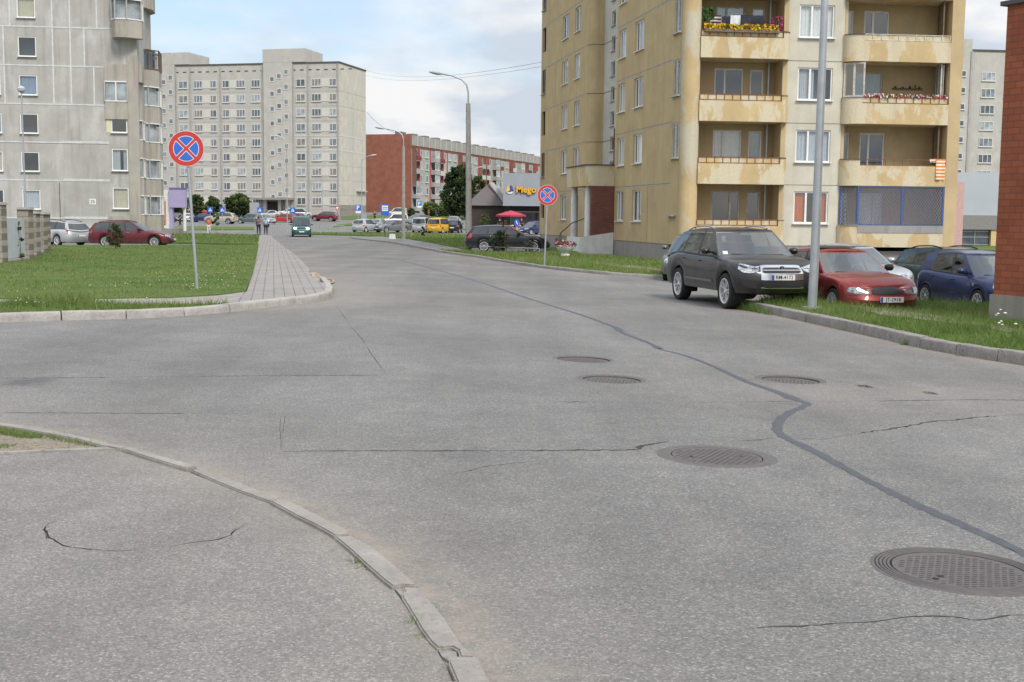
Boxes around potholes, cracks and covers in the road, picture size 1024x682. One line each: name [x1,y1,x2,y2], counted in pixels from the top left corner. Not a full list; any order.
manhole cover [577,375,647,384]
manhole cover [754,375,826,384]
crack [18,258,1024,557]
manhole cover [870,547,1024,597]
manhole cover [656,445,778,468]
crack [751,614,1024,629]
